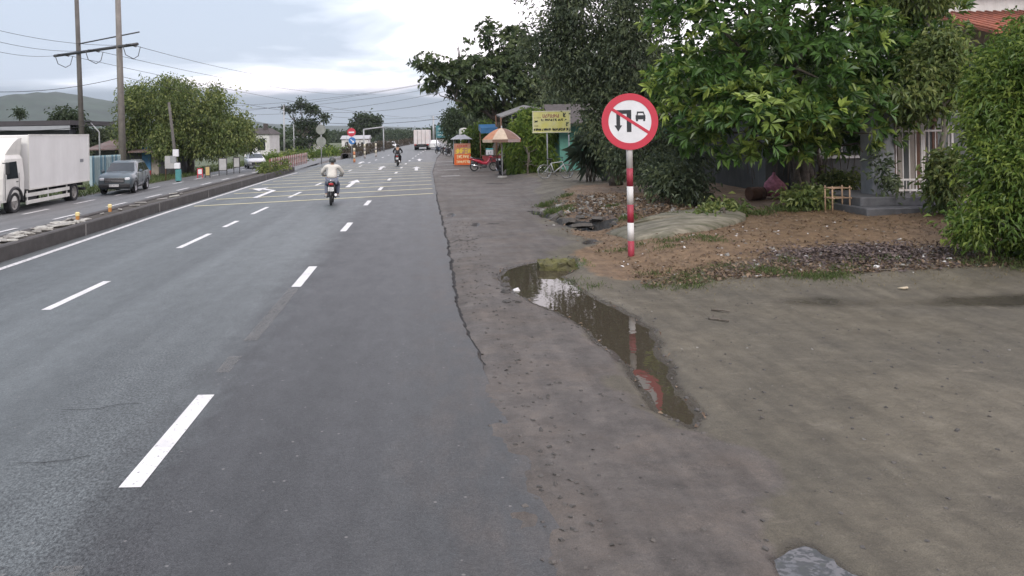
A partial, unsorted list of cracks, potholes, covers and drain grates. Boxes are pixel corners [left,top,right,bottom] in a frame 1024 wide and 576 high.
pothole [527,210,619,232]
pothole [489,256,724,433]
crack [436,192,500,365]
